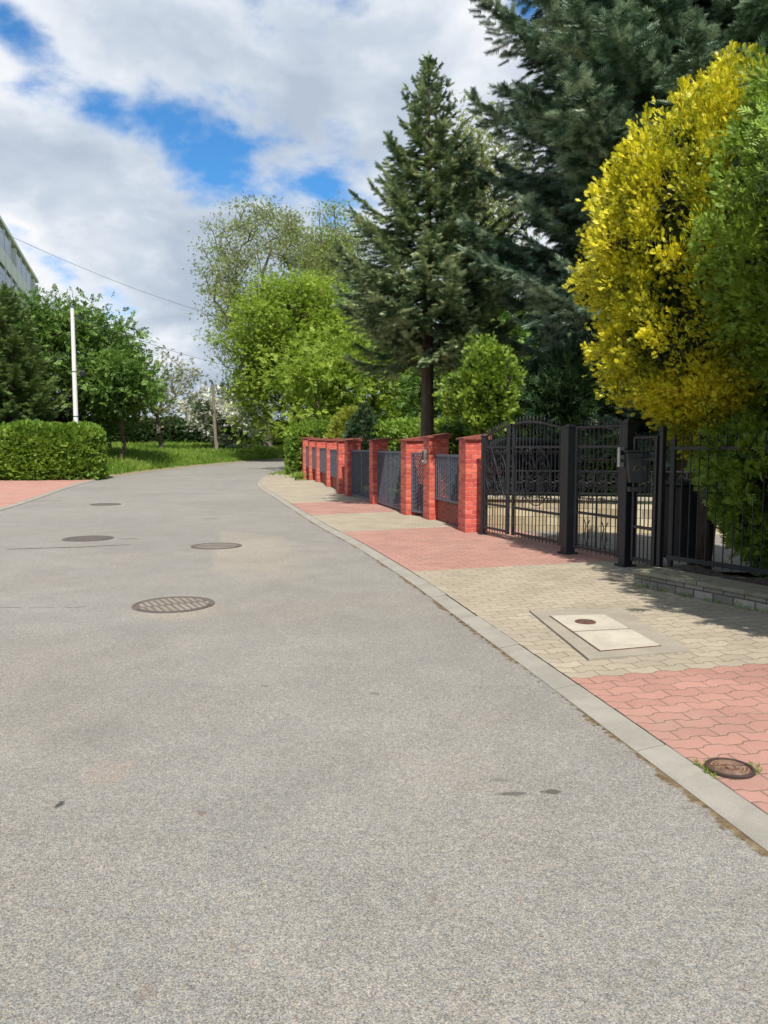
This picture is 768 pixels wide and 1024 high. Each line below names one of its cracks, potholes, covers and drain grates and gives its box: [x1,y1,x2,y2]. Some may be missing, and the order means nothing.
utility cover [705,757,756,780]
utility cover [529,608,691,661]
